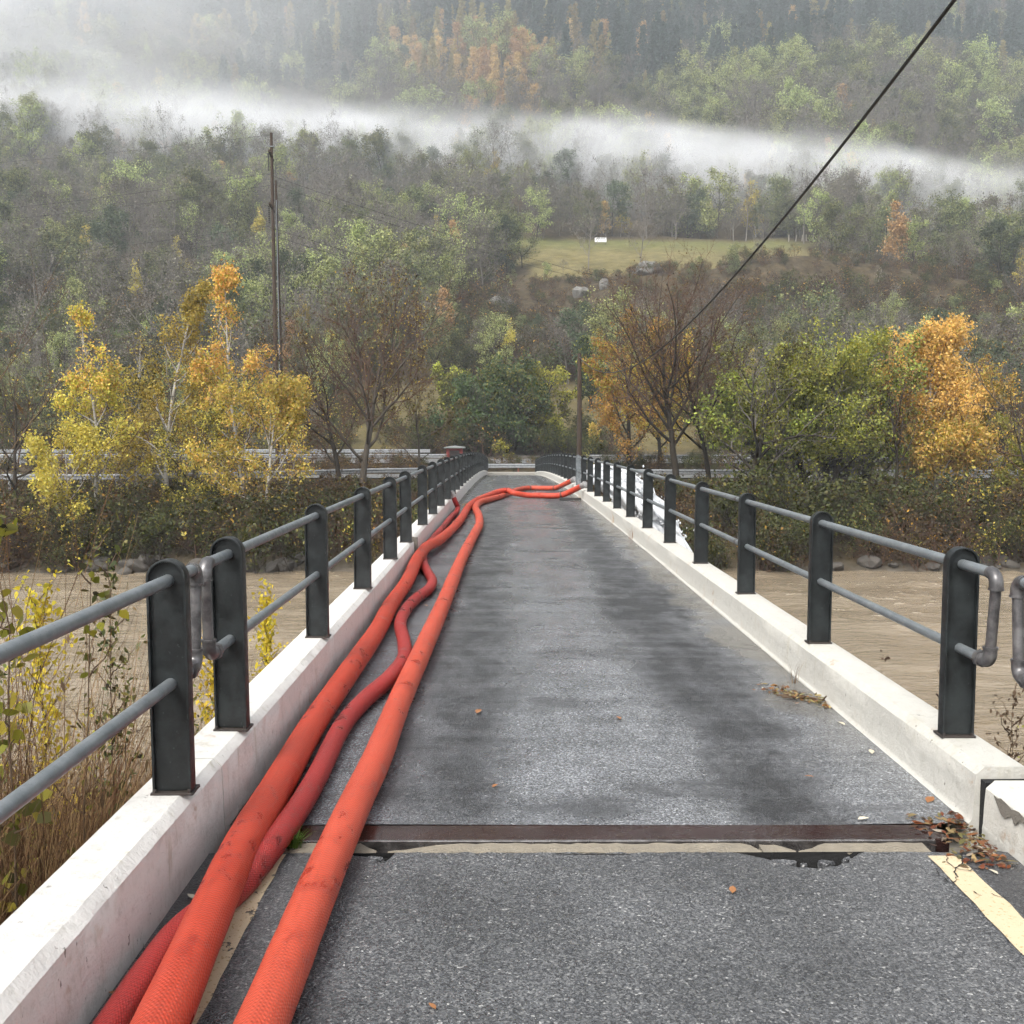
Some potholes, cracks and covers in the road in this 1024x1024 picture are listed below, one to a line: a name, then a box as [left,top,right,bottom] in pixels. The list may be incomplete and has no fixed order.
pothole [353,853,395,863]
pothole [734,852,862,869]
